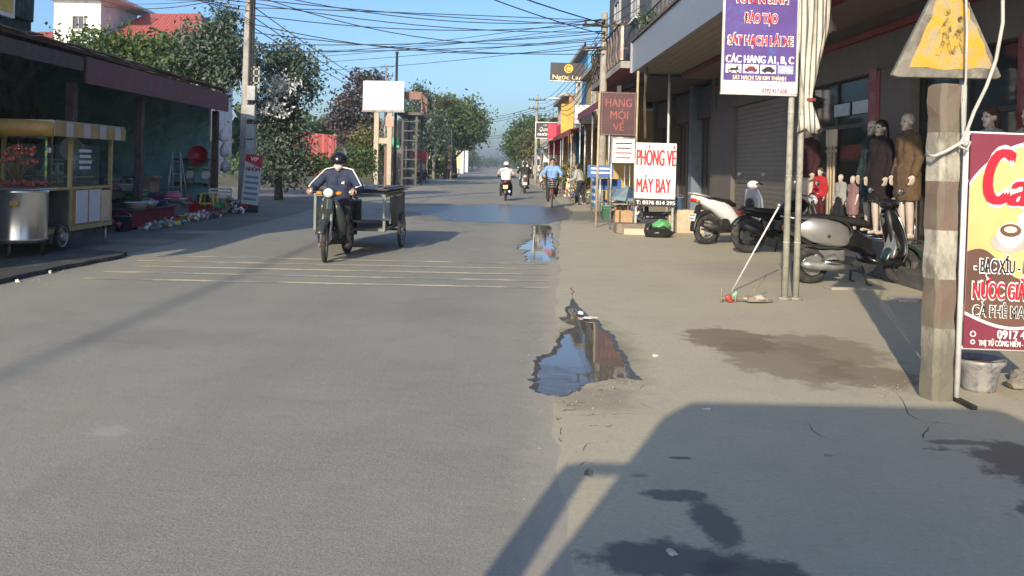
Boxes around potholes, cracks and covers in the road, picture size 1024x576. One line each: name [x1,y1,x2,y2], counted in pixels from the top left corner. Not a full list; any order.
crack [896,392,950,439]
pothole [527,298,643,397]
